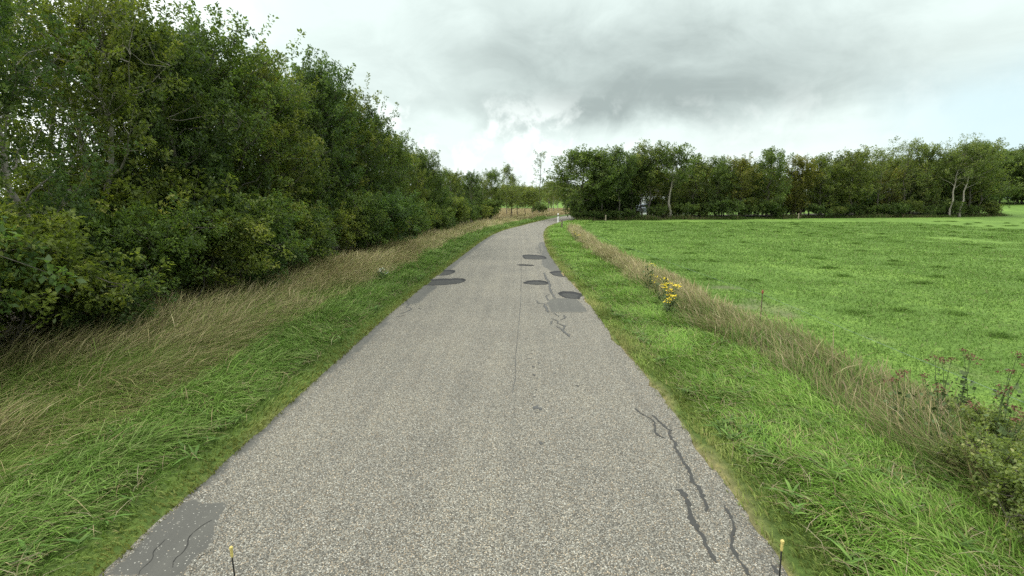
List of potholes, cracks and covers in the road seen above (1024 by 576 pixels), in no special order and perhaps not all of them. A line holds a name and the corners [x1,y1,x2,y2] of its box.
crack [724,505,751,575]
crack [139,520,211,572]
crack [512,298,579,444]
